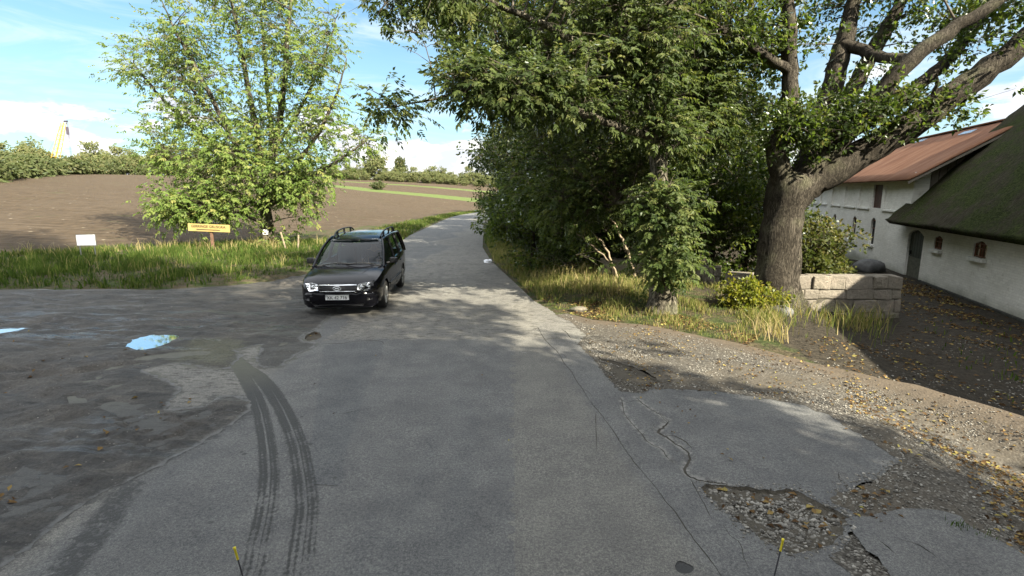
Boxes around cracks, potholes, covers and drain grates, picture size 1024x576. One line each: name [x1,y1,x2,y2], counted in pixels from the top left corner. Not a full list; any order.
crack [538,328,749,576]
pothole [598,357,660,391]
pothole [701,484,849,554]
pothole [675,561,694,574]
pothole [305,331,322,341]
